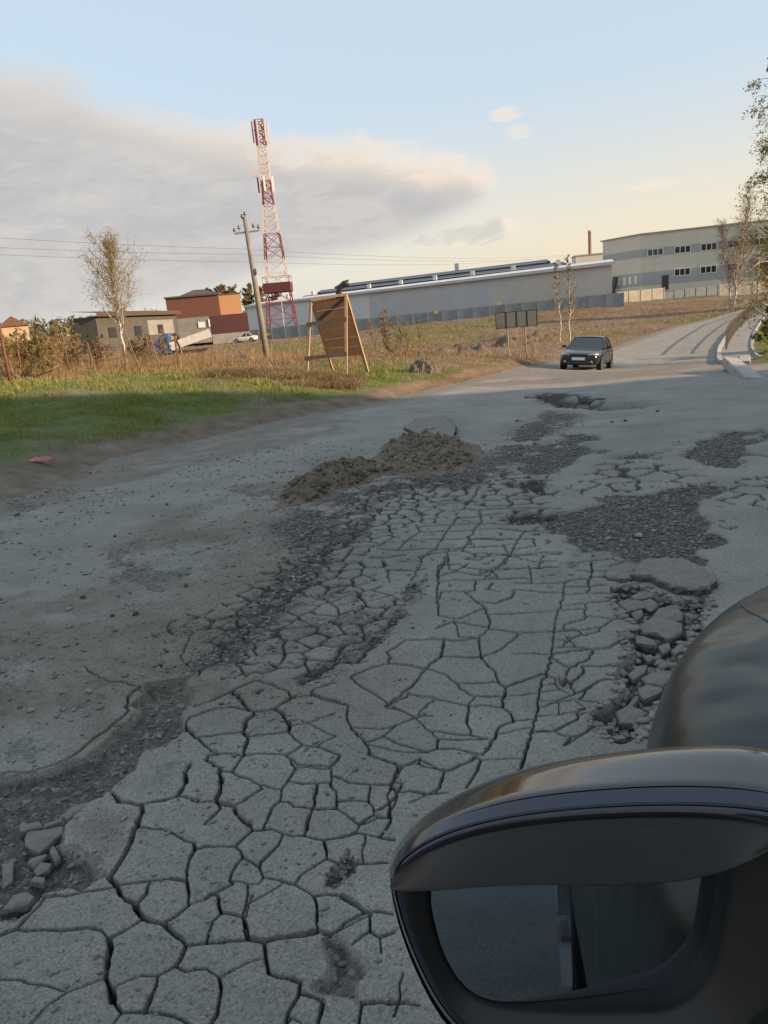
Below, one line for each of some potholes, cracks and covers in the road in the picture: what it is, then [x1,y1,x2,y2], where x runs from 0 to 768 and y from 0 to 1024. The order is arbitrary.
pothole [664,426,768,469]
crack [0,460,768,1024]
pothole [588,583,708,743]
pothole [536,395,675,411]
pothole [535,483,732,569]
